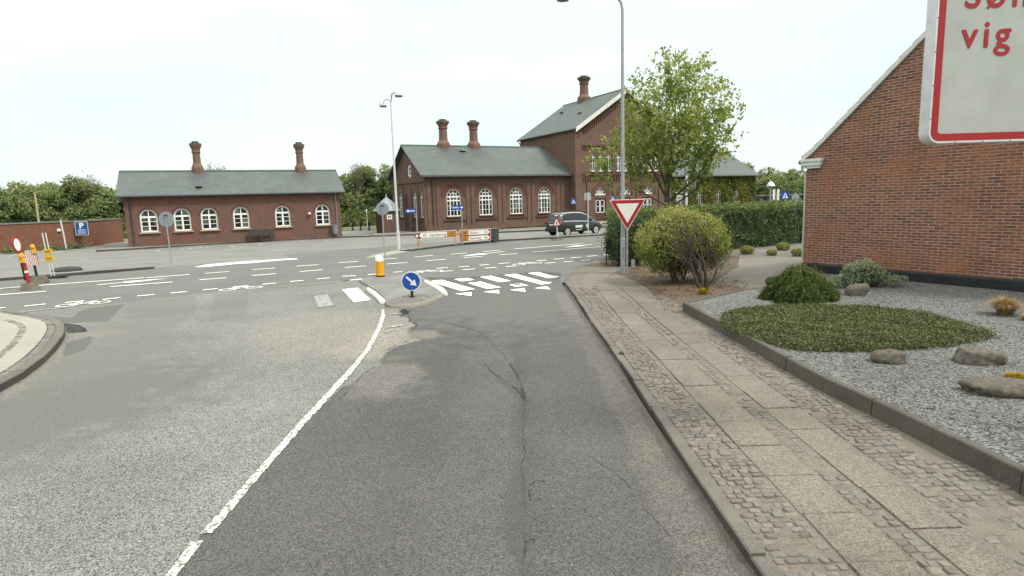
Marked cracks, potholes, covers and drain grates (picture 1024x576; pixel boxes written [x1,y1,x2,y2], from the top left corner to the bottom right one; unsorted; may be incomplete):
crack [423,319,545,565]
crack [560,427,669,534]
